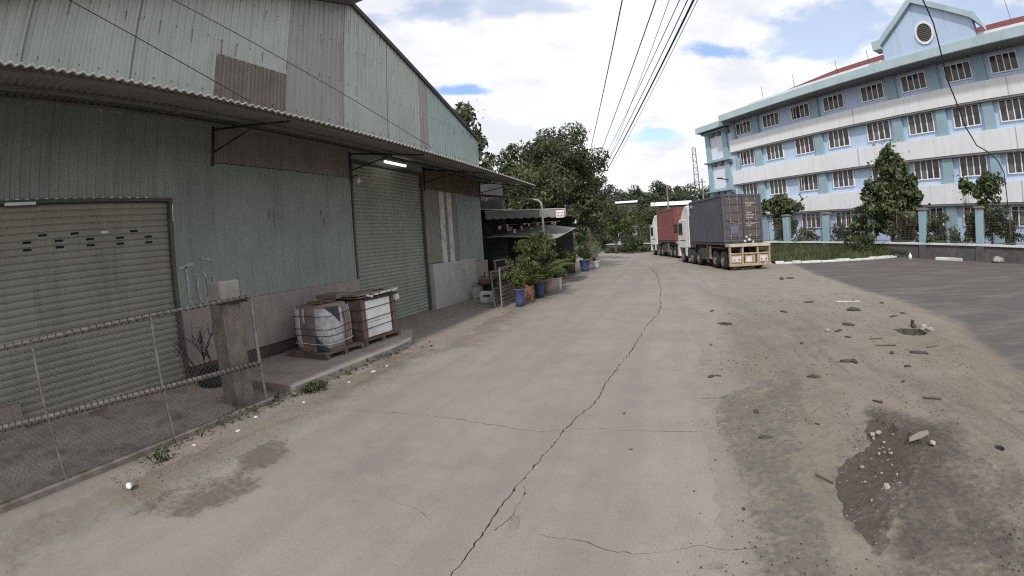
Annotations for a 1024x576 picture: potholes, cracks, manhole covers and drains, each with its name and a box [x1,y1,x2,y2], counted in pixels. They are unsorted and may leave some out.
pothole [835,419,937,557]
crack [361,266,697,576]
pothole [893,328,928,336]
